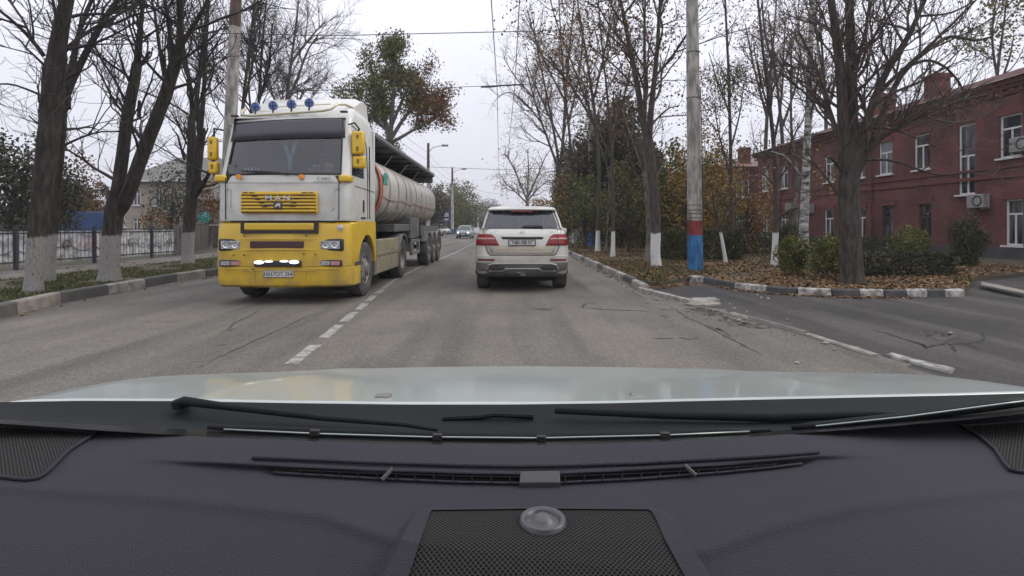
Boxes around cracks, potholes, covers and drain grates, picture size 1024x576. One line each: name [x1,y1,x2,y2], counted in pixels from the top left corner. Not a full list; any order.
crack [197,308,306,368]
crack [873,330,985,352]
crack [581,291,761,354]
